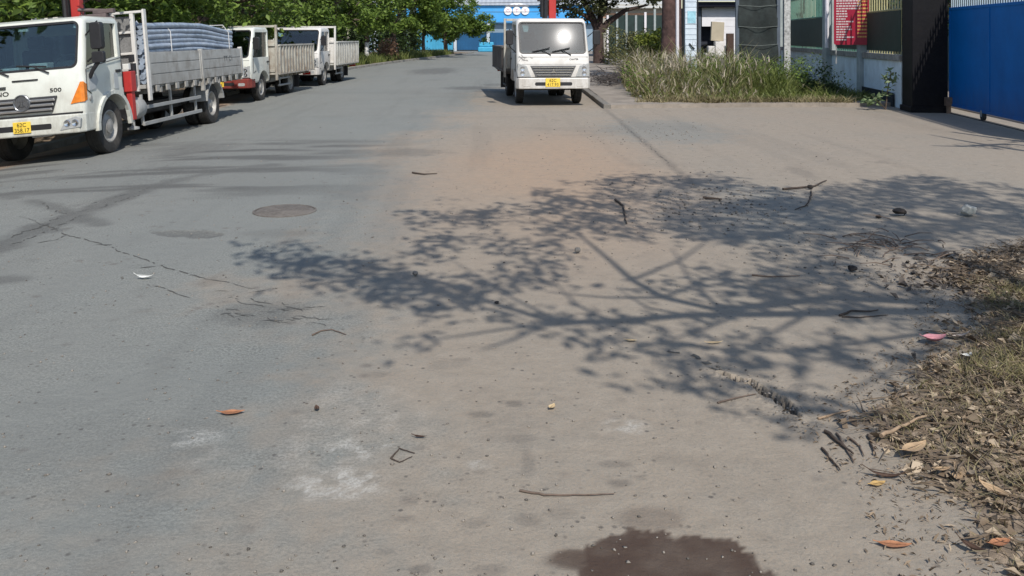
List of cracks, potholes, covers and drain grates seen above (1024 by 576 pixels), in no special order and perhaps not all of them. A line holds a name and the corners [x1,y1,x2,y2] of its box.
crack [11,188,326,326]
manhole cover [252,204,317,218]
crack [668,351,842,428]
